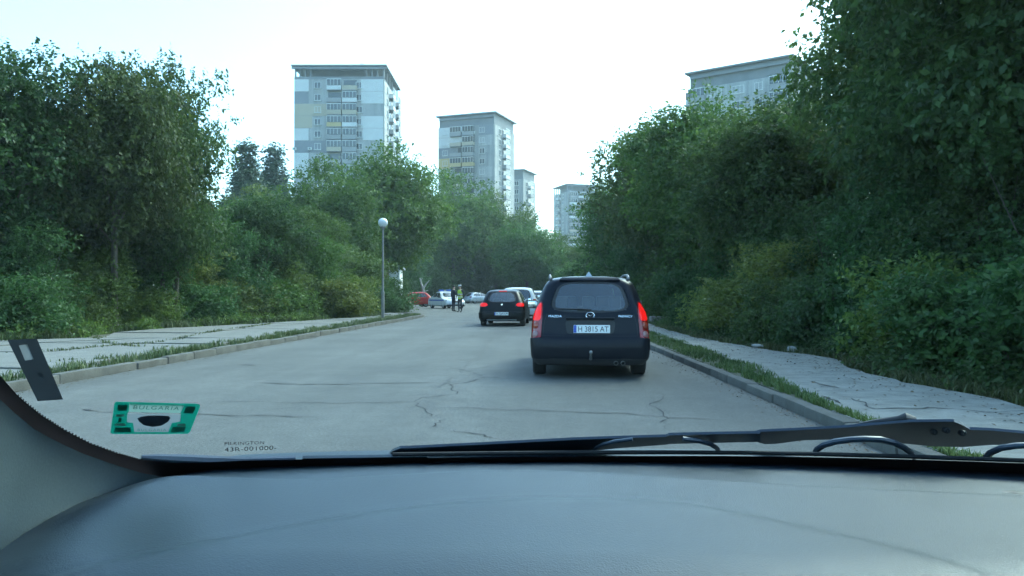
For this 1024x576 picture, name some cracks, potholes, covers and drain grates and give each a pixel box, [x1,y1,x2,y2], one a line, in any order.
crack [83,364,716,438]
